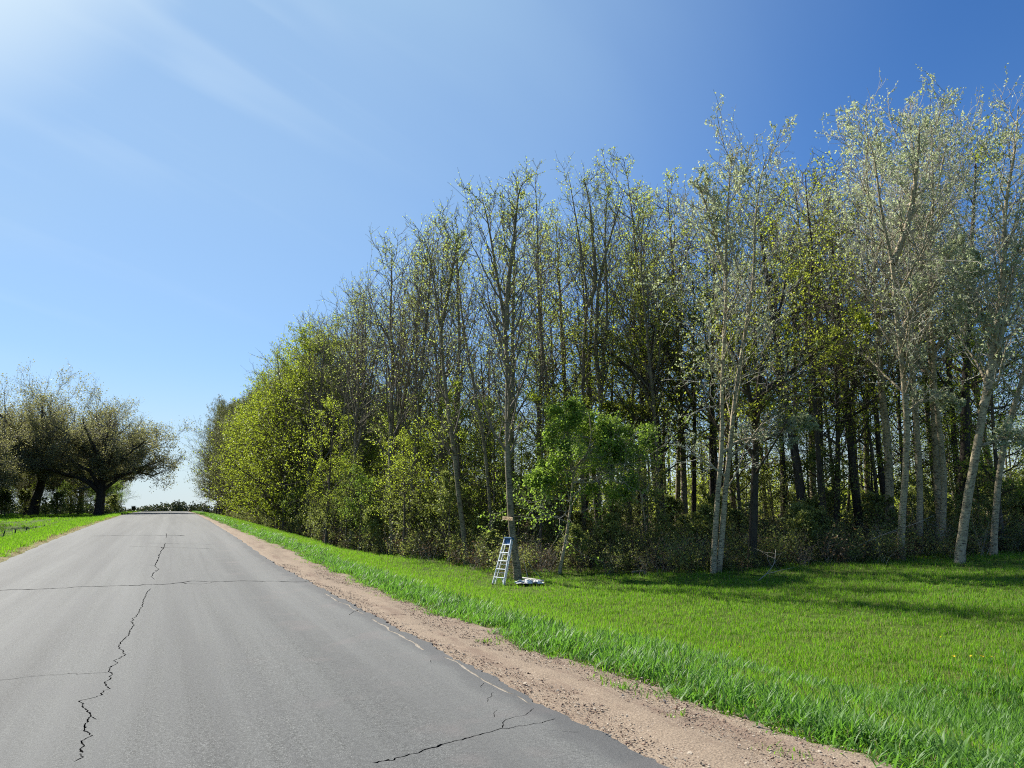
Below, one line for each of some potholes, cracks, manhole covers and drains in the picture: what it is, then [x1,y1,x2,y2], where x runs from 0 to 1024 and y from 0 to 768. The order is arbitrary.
crack [325,593,567,763]
crack [0,534,307,762]
